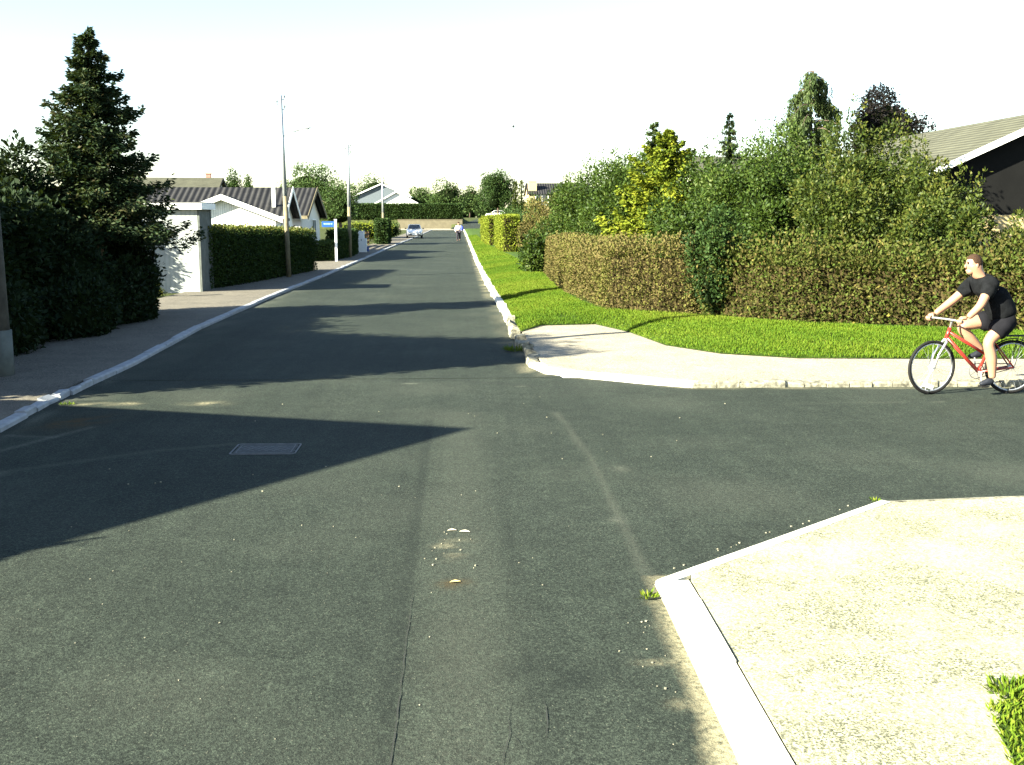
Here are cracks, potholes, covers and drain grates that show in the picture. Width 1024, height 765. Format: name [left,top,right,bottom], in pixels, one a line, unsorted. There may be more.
crack [389,596,413,765]
manhole cover [229,443,302,455]
